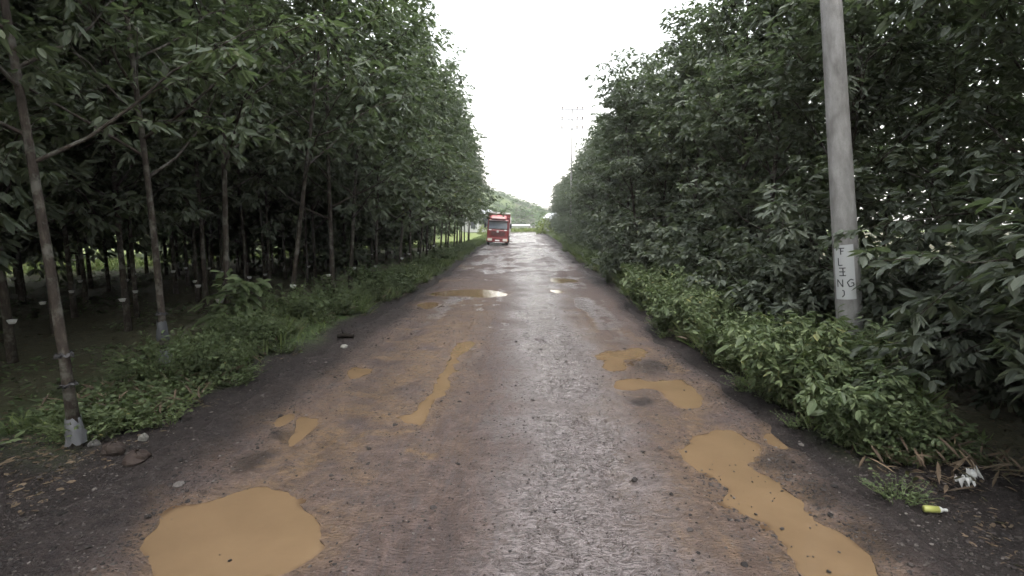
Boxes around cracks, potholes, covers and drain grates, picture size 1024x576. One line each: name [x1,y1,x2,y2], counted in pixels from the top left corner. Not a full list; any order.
pothole [397,341,476,425]
pothole [614,378,704,410]
pothole [140,486,325,576]
pothole [346,367,373,379]
pothole [272,414,295,427]
pothole [595,347,649,372]
pothole [676,429,880,576]
pothole [287,416,321,450]
pothole [430,289,507,298]
